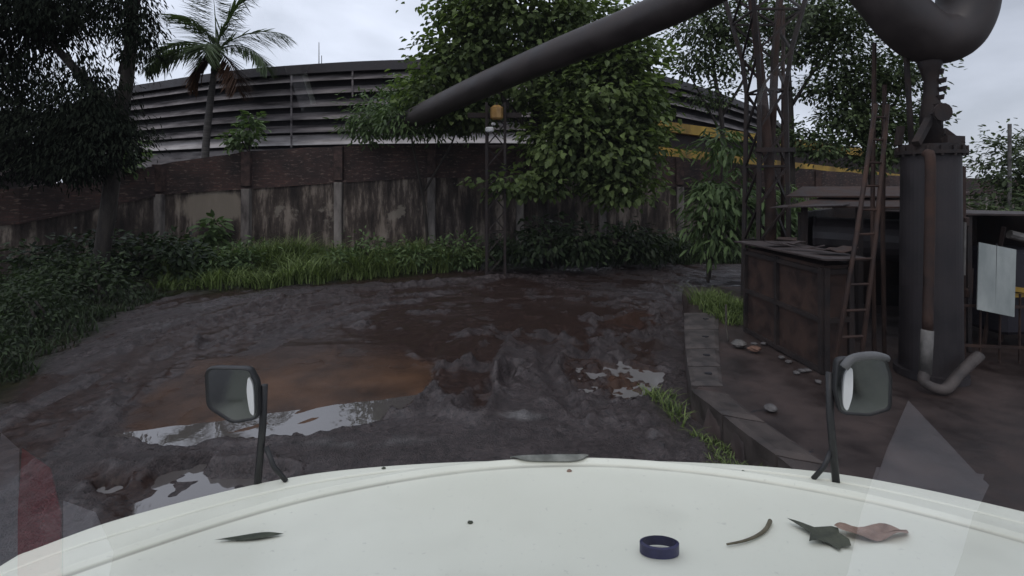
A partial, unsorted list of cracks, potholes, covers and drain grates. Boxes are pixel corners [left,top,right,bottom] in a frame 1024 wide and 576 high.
pothole [71,340,448,453]
pothole [470,351,532,398]
pothole [83,445,307,528]
pothole [559,347,683,404]
